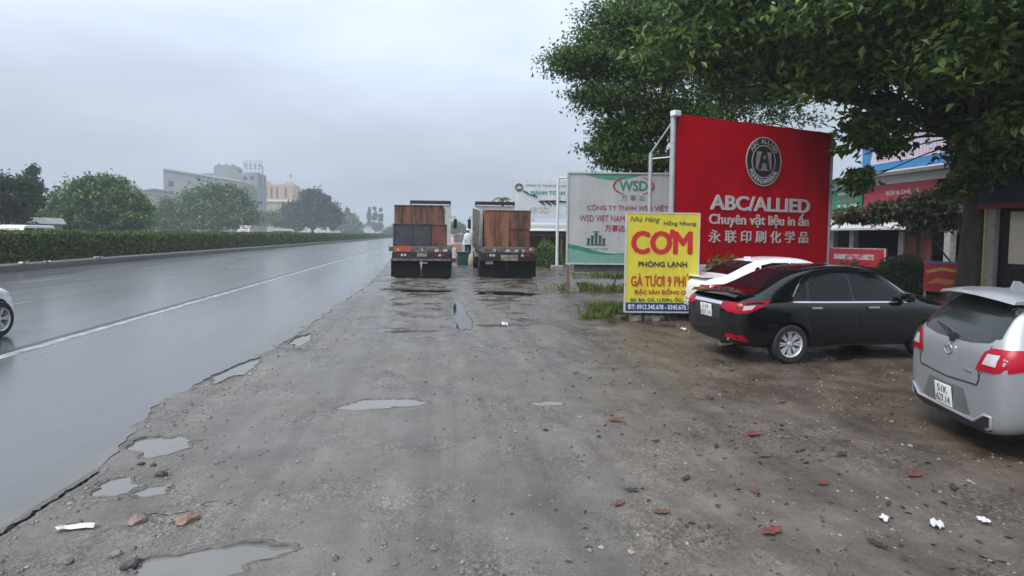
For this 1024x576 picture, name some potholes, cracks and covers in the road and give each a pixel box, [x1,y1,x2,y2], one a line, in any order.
pothole [86,475,143,498]
pothole [211,354,262,385]
crack [0,469,109,542]
pothole [126,538,301,576]
pothole [122,434,195,459]
pothole [286,333,313,347]
pothole [128,484,176,499]
pothole [331,397,434,411]
pothole [447,299,474,331]
